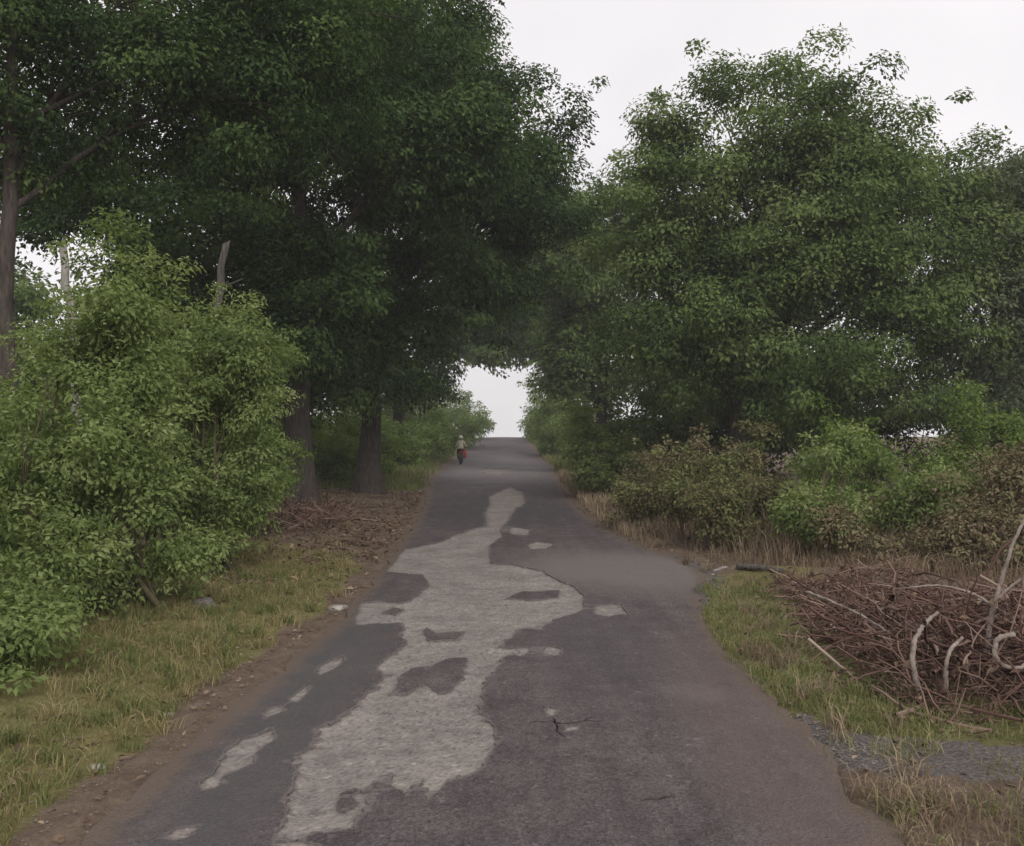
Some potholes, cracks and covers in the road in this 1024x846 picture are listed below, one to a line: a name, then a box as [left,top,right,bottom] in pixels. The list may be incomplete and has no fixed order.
pothole [158,825,199,840]
pothole [594,603,628,617]
pothole [276,486,585,842]
pothole [200,727,275,790]
crack [531,717,601,738]
pothole [263,705,284,718]
